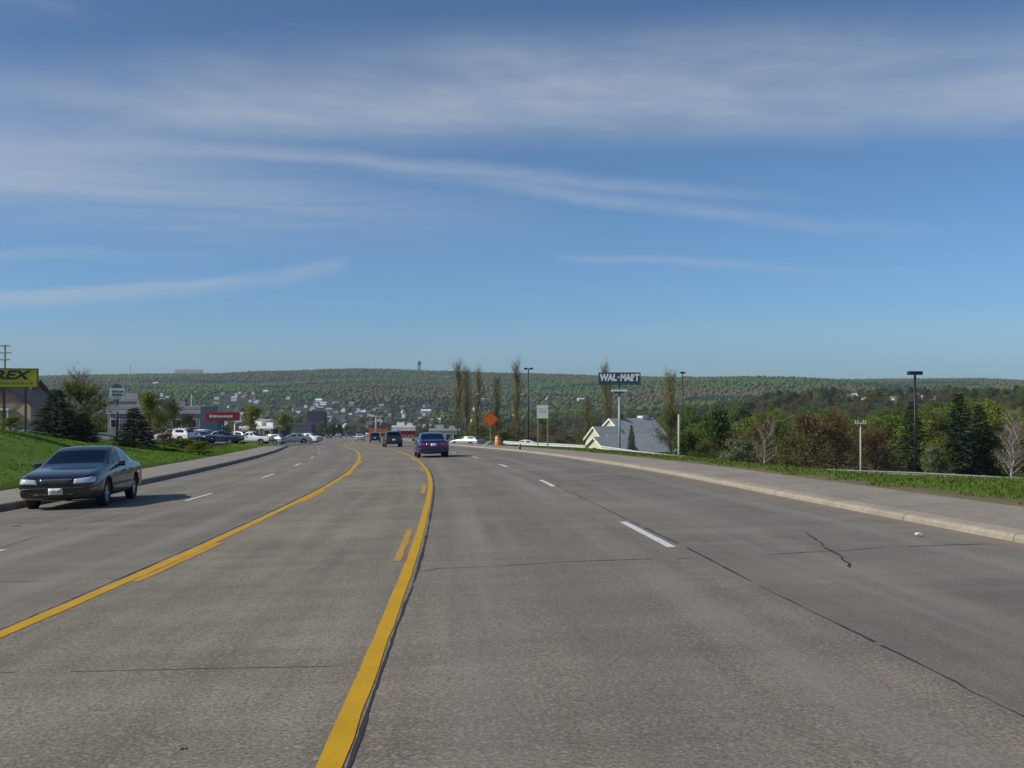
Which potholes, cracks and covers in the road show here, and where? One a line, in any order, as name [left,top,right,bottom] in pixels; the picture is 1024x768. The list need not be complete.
crack [765,532,1003,568]
